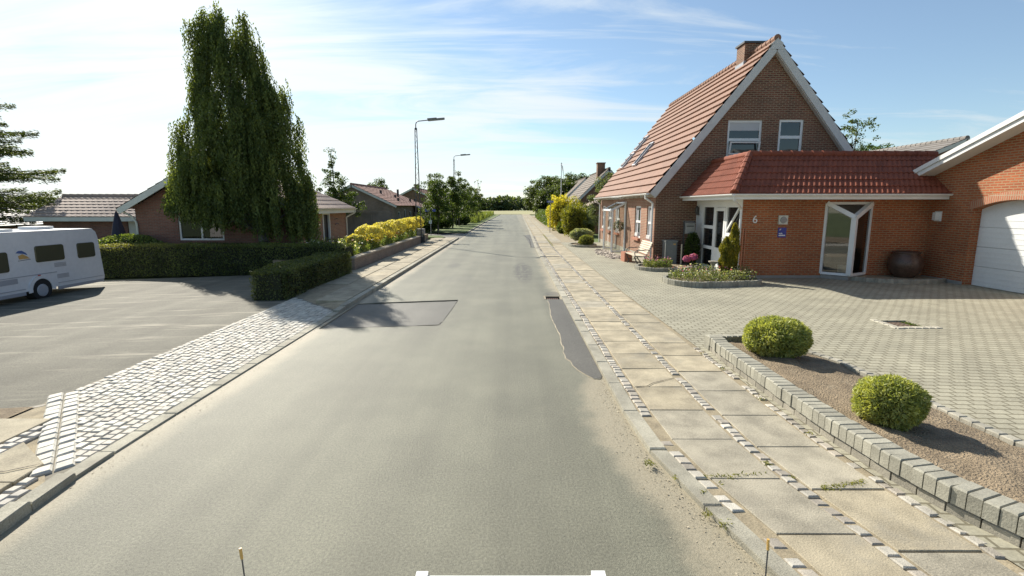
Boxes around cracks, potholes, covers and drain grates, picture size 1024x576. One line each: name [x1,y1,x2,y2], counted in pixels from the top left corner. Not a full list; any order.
manhole cover [870,319,943,329]
